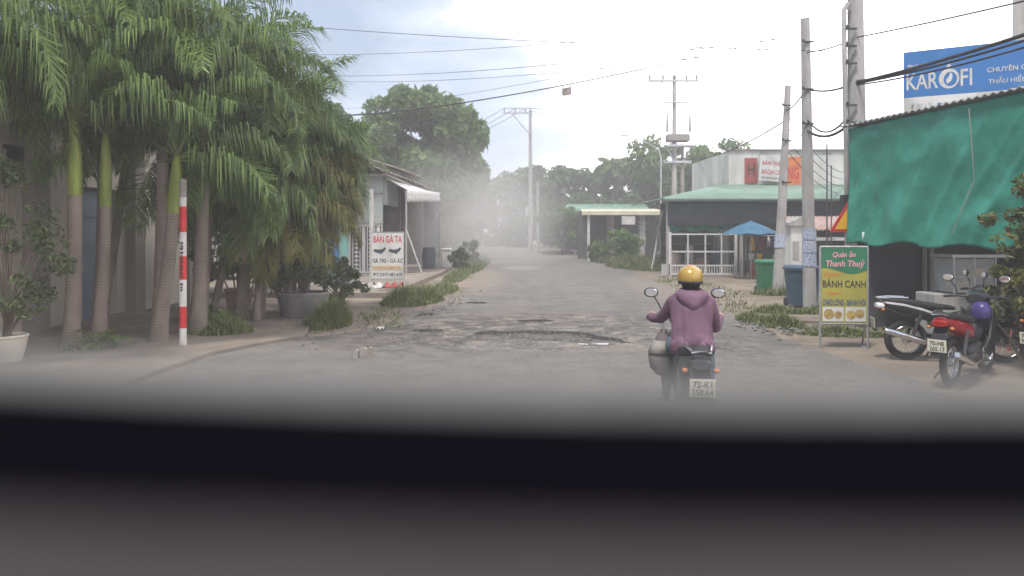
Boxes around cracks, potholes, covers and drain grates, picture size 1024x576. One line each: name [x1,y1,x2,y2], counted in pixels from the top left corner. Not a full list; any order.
pothole [474,330,632,345]
